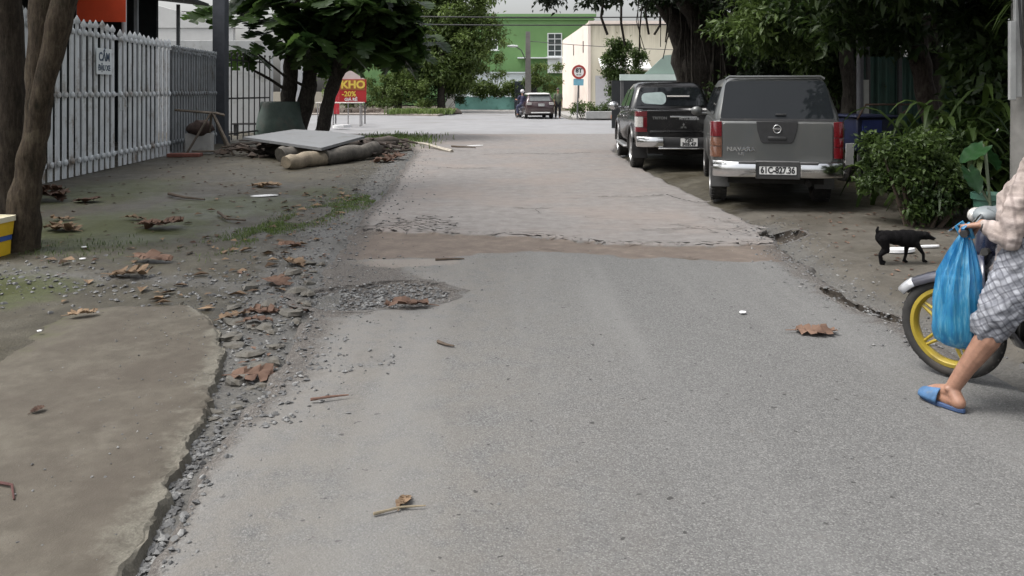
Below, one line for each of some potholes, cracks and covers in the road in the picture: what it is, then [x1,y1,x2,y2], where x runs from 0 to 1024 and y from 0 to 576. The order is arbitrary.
pothole [281,278,471,313]
pothole [756,229,811,245]
